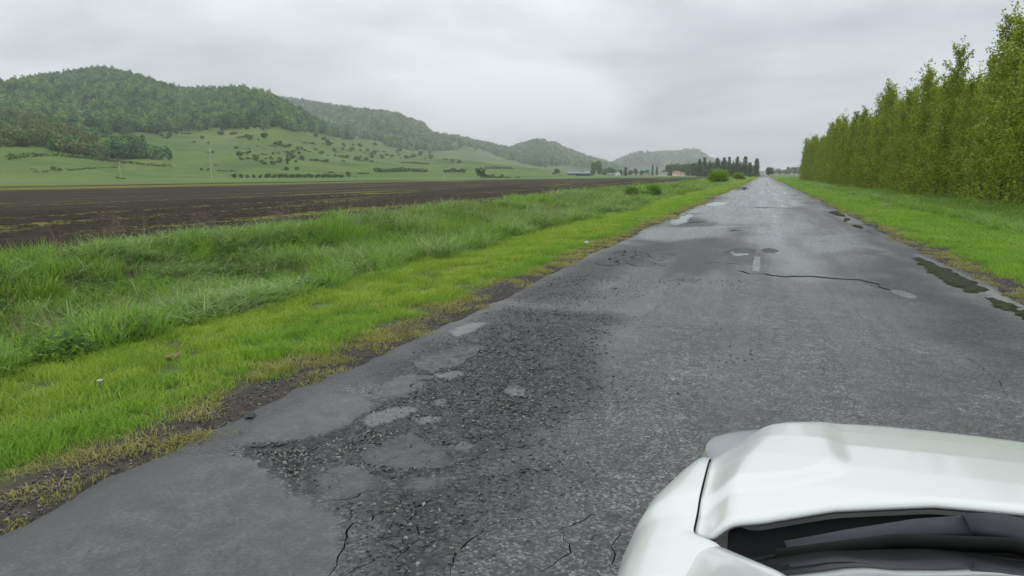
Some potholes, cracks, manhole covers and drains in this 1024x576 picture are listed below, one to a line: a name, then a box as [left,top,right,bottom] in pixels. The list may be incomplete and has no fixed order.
crack [536,514,621,573]
crack [450,506,515,576]
crack [319,490,435,576]
crack [594,250,666,267]
crack [704,262,890,290]
